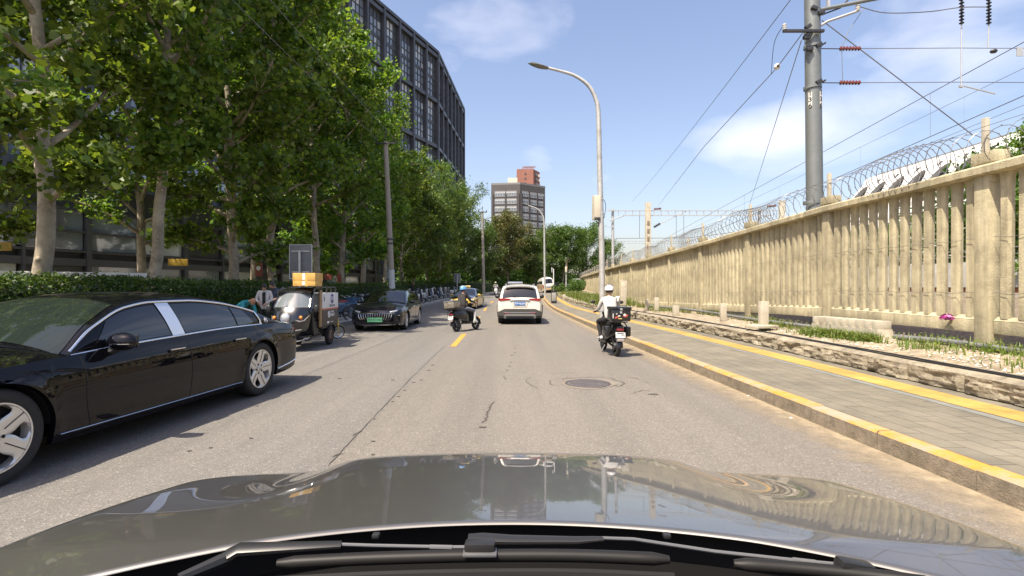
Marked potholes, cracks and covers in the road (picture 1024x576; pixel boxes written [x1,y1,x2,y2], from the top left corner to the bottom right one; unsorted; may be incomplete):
crack [526,369,648,393]
manhole cover [561,379,617,389]
